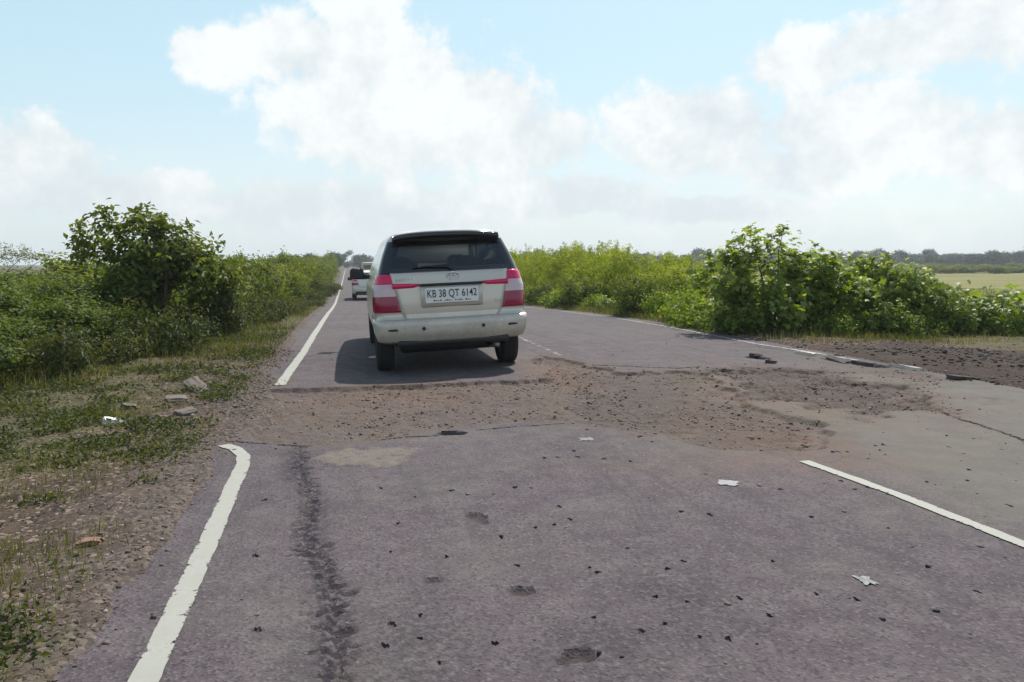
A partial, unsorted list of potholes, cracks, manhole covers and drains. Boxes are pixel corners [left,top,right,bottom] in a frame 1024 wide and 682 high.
pothole [506,585,536,597]
pothole [848,360,891,368]
pothole [701,367,951,419]
pothole [248,378,604,446]
crack [940,411,1024,442]
pothole [553,648,596,666]
pothole [463,512,489,525]
pothole [530,356,839,454]
